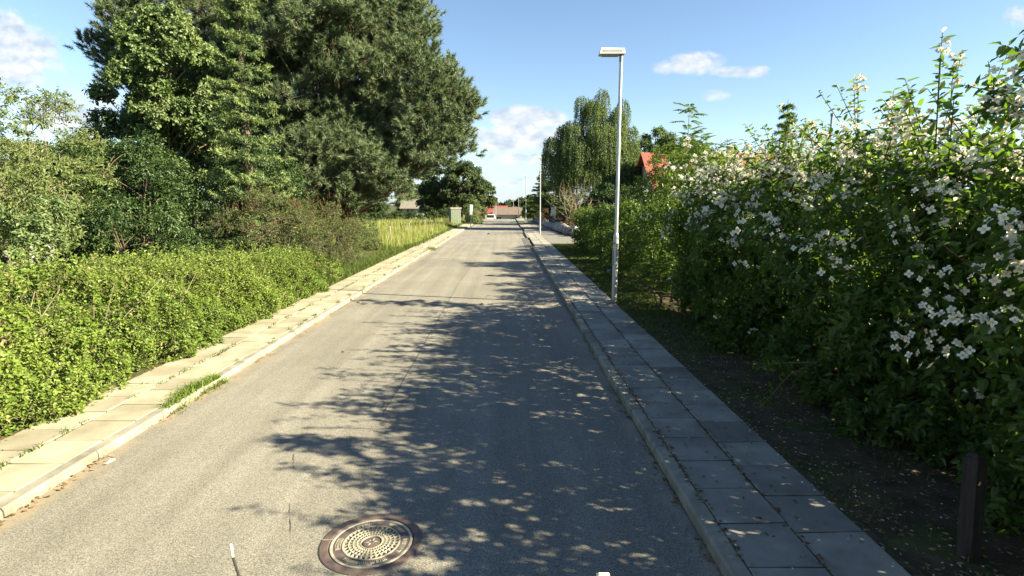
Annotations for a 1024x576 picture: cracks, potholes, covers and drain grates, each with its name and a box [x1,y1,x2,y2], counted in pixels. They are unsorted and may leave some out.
manhole cover [318,514,423,576]
